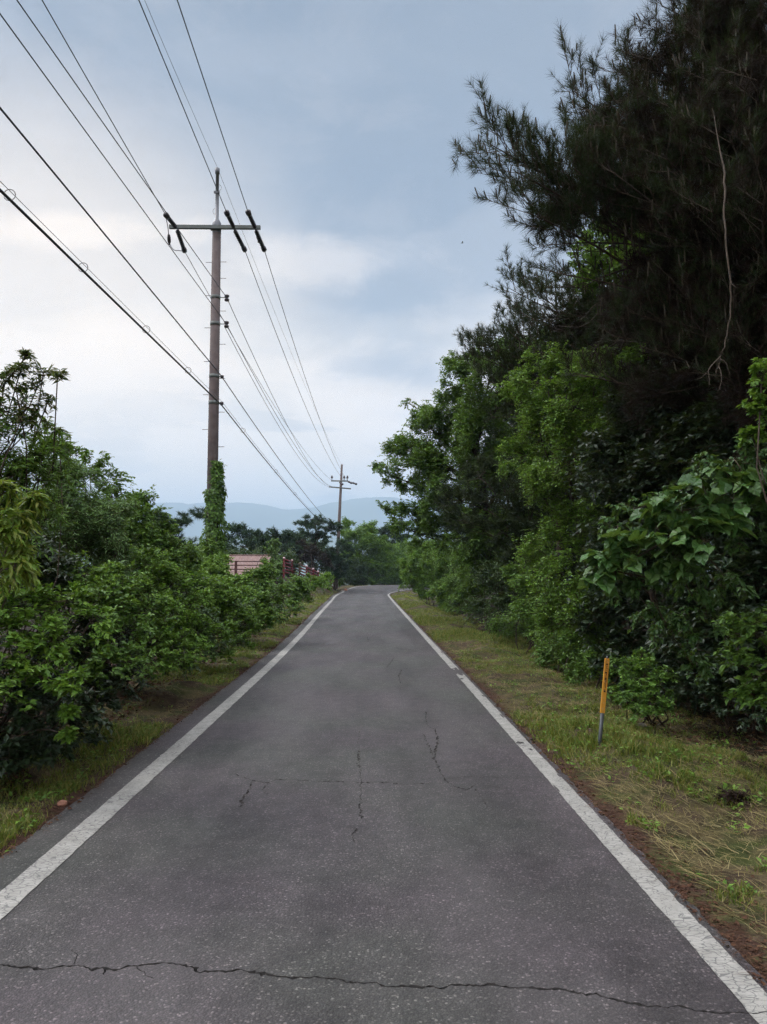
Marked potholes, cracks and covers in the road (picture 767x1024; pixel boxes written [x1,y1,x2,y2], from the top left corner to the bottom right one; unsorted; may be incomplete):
crack [0,949,749,1014]
crack [233,712,496,843]
